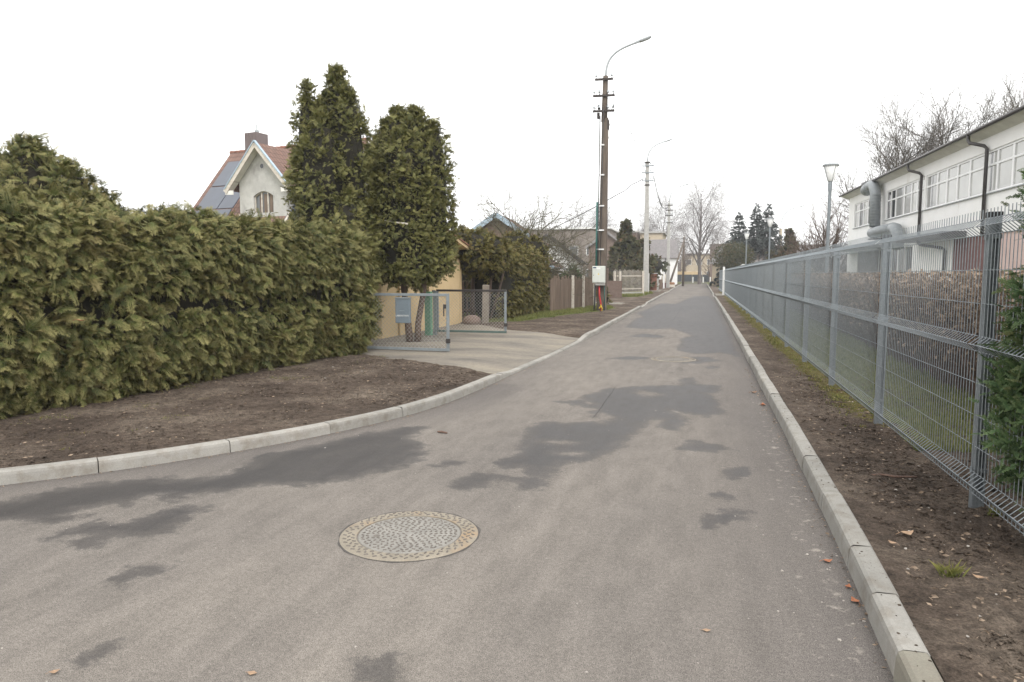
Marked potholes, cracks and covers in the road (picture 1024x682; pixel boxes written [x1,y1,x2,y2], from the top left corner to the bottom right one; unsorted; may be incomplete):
manhole cover [338,511,481,563]
